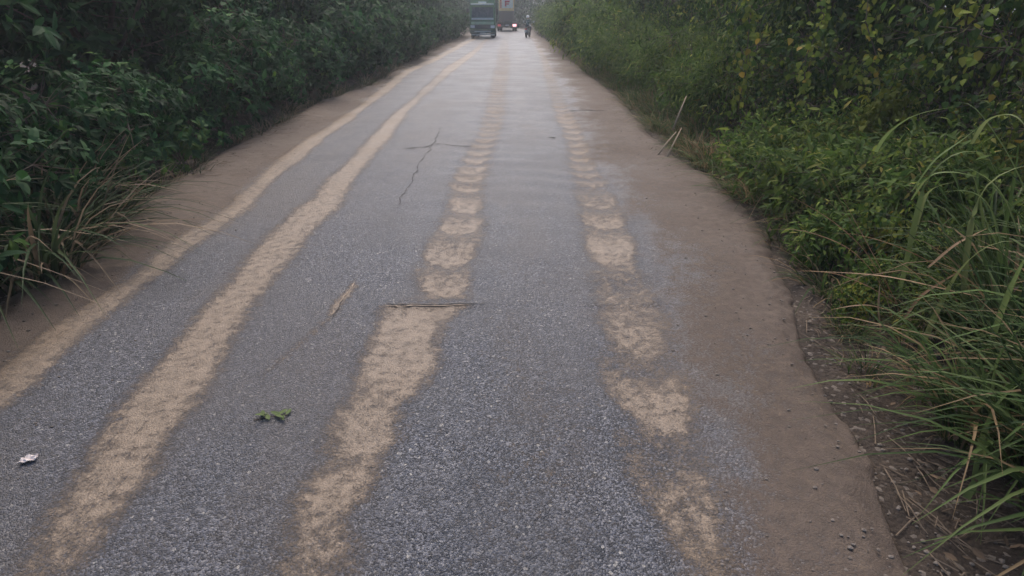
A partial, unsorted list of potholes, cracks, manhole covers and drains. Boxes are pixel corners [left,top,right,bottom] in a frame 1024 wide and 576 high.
crack [399,132,458,204]
